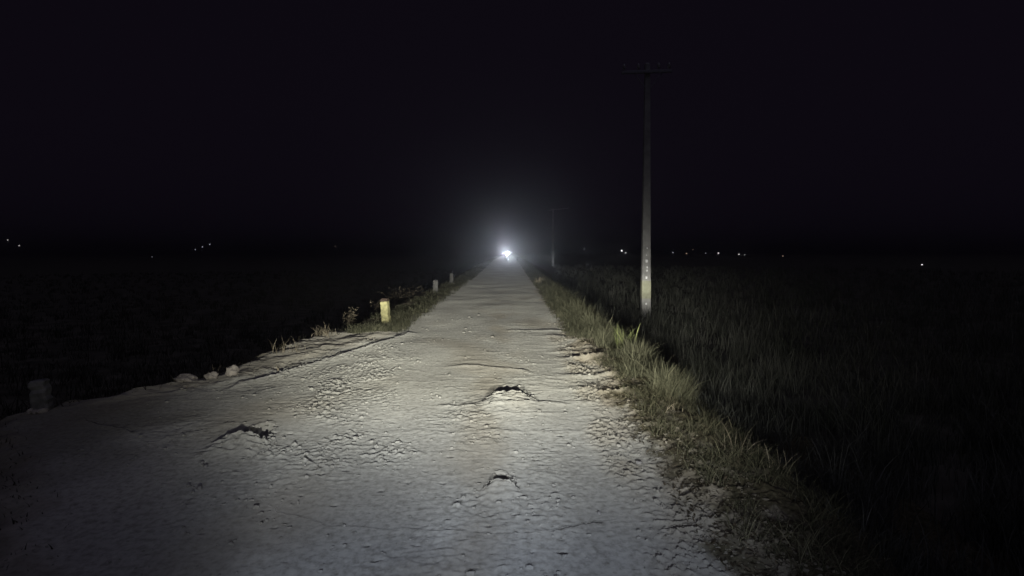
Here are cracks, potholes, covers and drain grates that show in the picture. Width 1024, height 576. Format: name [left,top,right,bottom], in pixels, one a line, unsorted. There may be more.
pothole [481,383,538,402]
pothole [211,421,285,447]
crack [238,332,408,382]
pothole [482,470,520,491]
